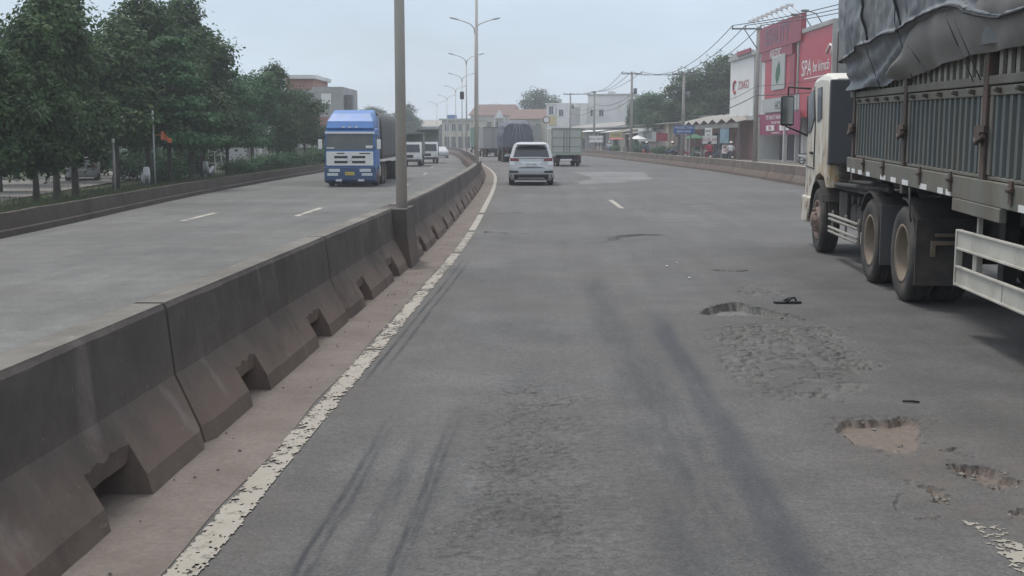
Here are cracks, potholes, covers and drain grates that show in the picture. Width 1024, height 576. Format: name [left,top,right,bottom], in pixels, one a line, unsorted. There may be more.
pothole [935,459,1024,493]
pothole [586,233,670,243]
pothole [904,480,956,506]
pothole [823,414,944,459]
pothole [695,301,815,321]
